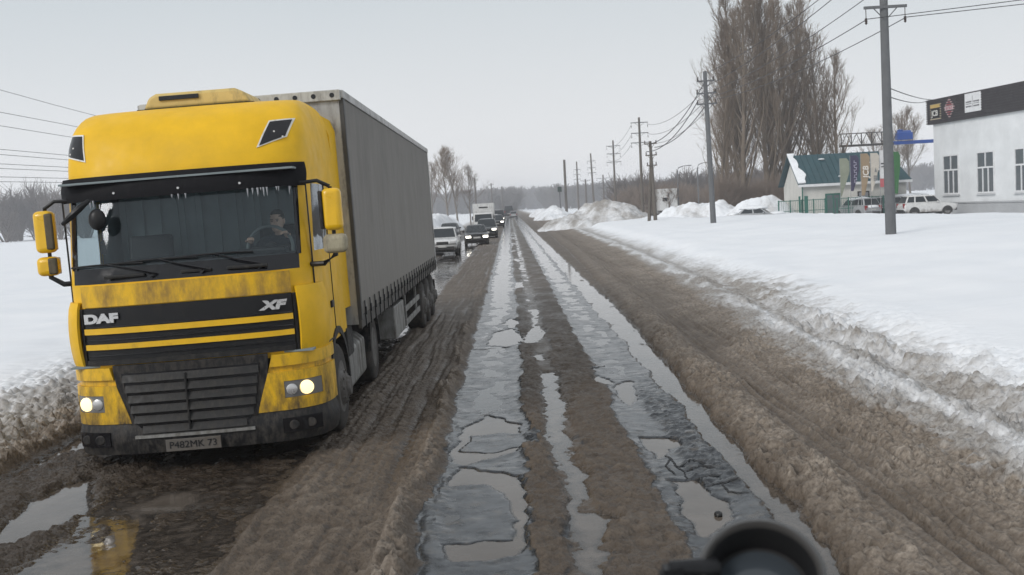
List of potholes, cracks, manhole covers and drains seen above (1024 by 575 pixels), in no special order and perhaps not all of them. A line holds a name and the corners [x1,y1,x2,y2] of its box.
pothole [664,473,743,539]
pothole [612,380,644,406]
pothole [446,414,536,466]
pothole [431,465,539,562]
pothole [637,435,690,459]
pothole [586,373,618,385]
crack [665,455,749,493]
